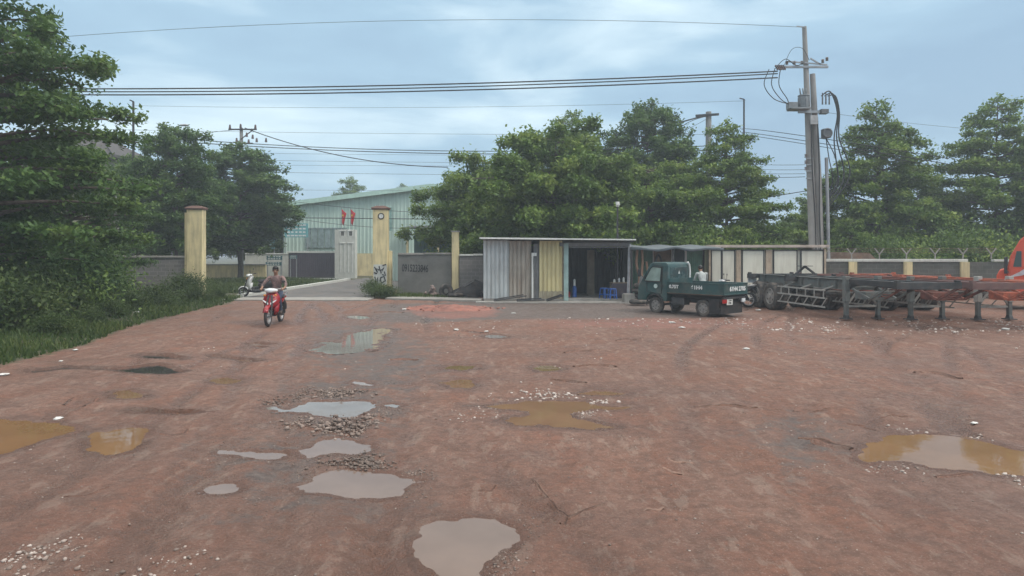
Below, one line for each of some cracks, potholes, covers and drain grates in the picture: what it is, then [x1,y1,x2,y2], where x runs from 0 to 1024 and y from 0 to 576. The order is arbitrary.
pothole [402,513,530,576]
pothole [75,424,159,460]
pothole [209,447,298,461]
pothole [0,417,86,456]
pothole [462,398,637,431]
pothole [289,436,380,459]
pothole [257,399,377,420]
pothole [850,431,1024,478]
pothole [102,389,154,400]
pothole [429,377,482,390]
pothole [195,480,250,497]
pothole [283,466,428,503]
